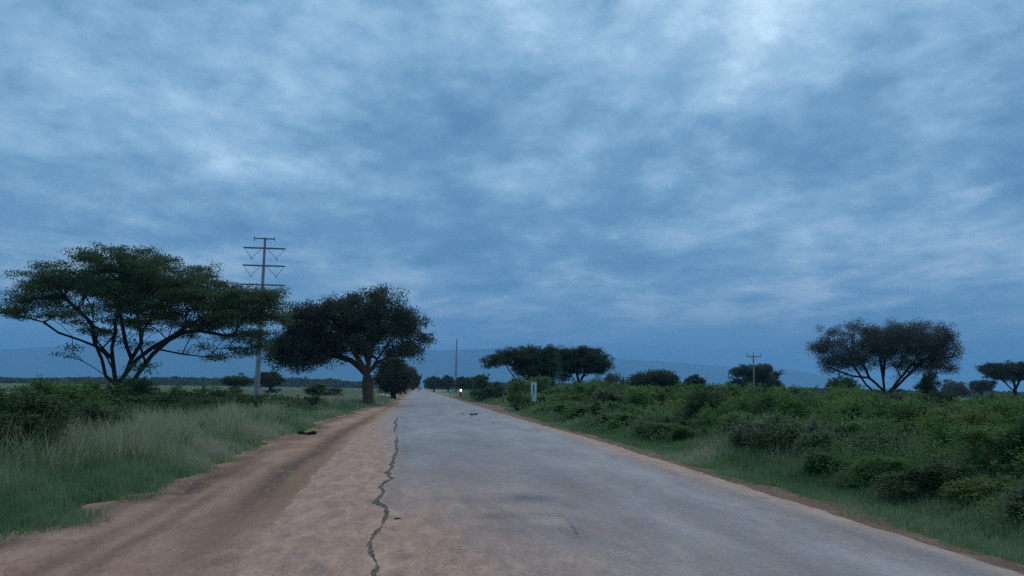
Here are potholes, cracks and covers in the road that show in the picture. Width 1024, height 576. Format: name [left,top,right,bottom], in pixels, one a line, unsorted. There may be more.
crack [366,418,399,576]
